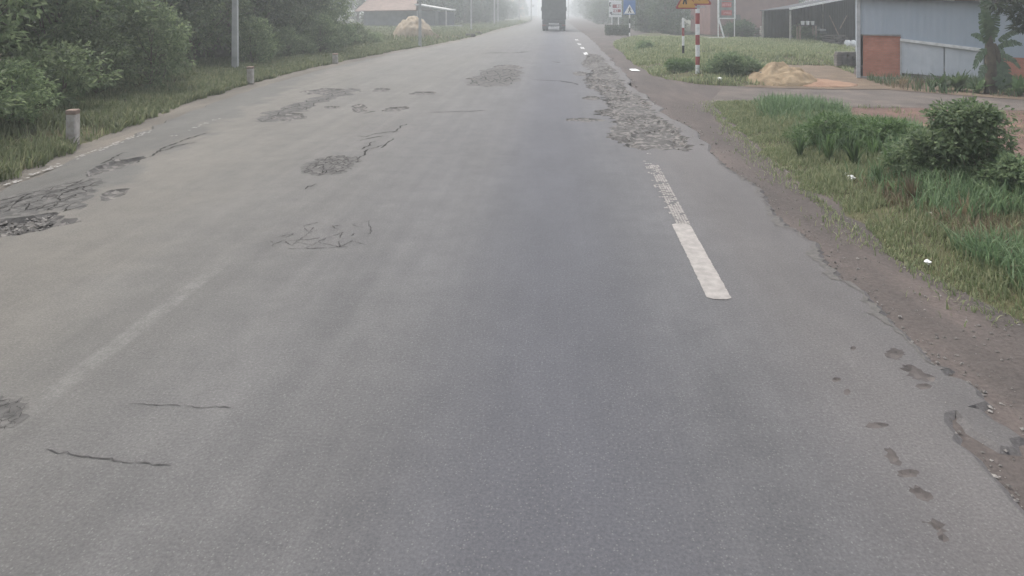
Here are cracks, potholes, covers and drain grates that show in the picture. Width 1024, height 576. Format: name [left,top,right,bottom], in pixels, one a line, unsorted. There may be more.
pothole [100,188,130,201]
pothole [922,518,949,542]
pothole [271,113,307,121]
crack [48,449,171,466]
pothole [581,54,695,152]
pothole [909,485,934,502]
crack [0,133,205,217]
pothole [884,348,905,360]
pothole [884,447,902,466]
pothole [900,364,937,382]
crack [271,221,372,249]
pothole [897,469,919,478]
